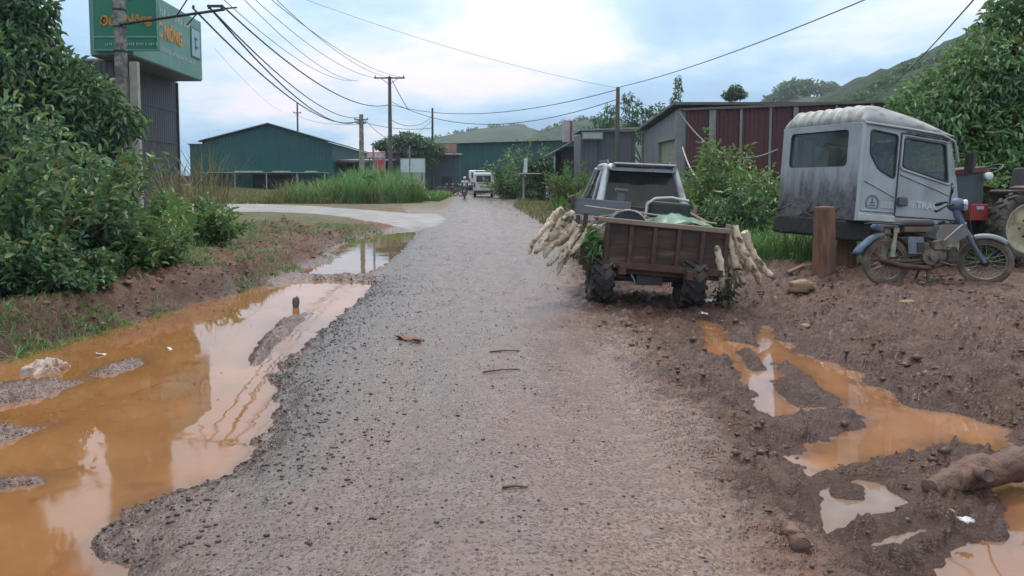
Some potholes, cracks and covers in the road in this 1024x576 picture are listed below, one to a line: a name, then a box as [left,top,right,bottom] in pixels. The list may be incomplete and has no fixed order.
pothole [0,272,383,576]
pothole [788,460,943,535]
pothole [882,482,1024,576]
pothole [684,312,1024,478]
